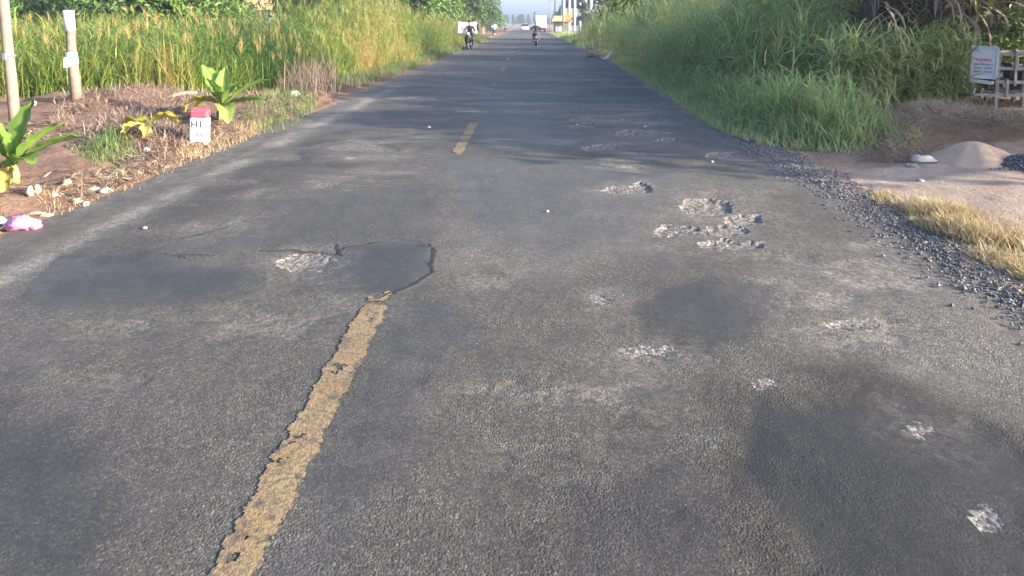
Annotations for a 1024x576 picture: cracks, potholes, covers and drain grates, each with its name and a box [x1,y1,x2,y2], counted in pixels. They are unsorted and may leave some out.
pothole [966,504,1006,533]
pothole [722,213,764,227]
pothole [677,198,735,216]
pothole [271,253,339,273]
crack [261,240,439,294]
pothole [823,318,881,334]
pothole [902,421,935,440]
pothole [752,376,785,390]
pothole [618,344,681,362]
pothole [701,225,751,238]
pothole [596,181,654,194]
pothole [652,224,704,238]
